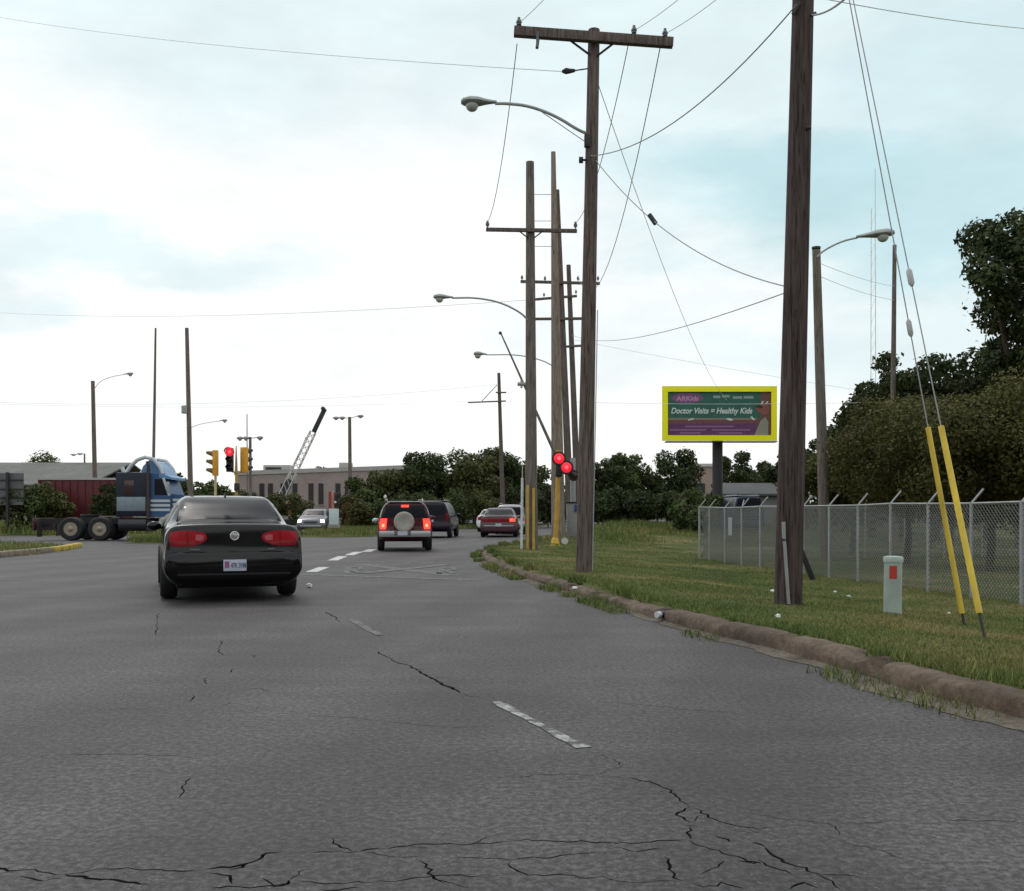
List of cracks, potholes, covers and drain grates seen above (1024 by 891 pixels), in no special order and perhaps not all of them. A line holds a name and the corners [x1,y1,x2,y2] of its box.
crack [763,815,904,860]
crack [377,651,492,698]
crack [0,752,861,891]
